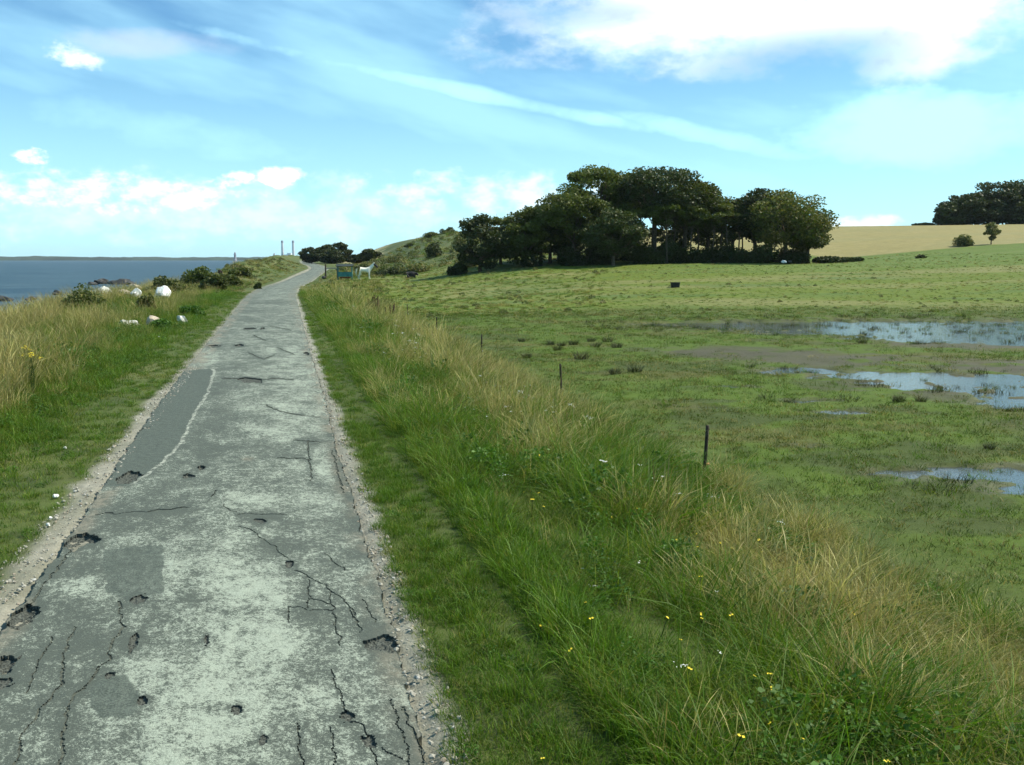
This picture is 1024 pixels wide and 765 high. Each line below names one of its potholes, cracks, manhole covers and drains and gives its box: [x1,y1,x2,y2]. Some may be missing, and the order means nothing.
crack [12,601,127,765]
crack [211,490,377,646]
pothole [7,603,42,630]
pothole [128,632,140,654]
crack [98,507,190,515]
pothole [359,734,377,748]
pothole [0,677,15,690]
pothole [115,470,144,484]
pothole [0,655,22,675]
crack [329,669,425,765]
pothole [362,634,400,653]
pothole [339,709,356,723]
